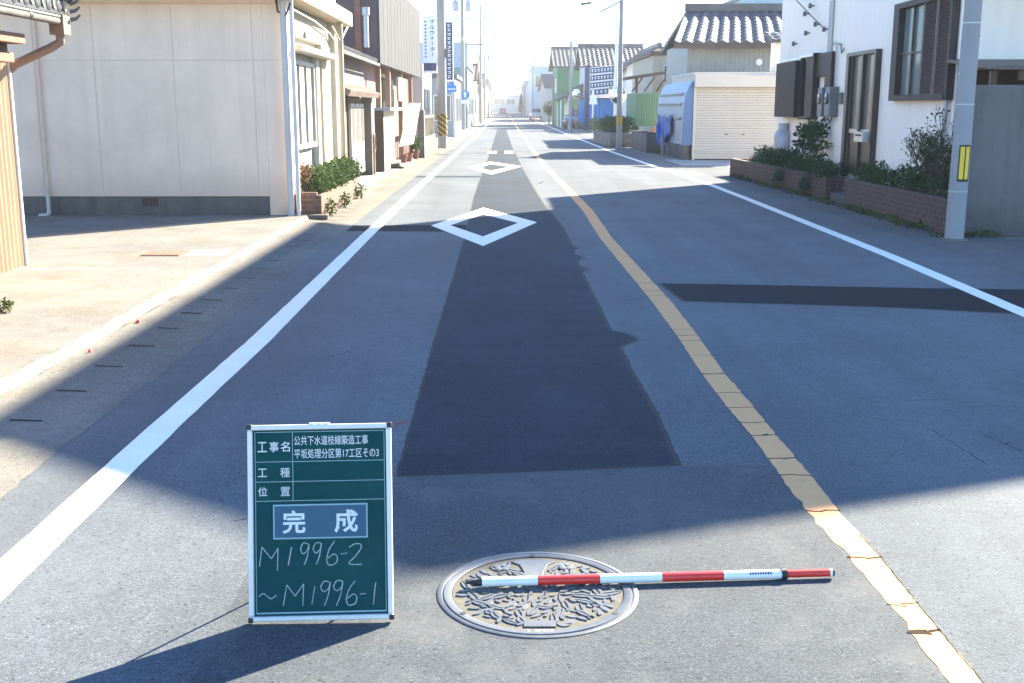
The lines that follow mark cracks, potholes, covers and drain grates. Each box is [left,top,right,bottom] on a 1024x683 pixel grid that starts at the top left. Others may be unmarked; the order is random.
manhole cover [437,552,639,639]
crack [927,428,1023,465]
